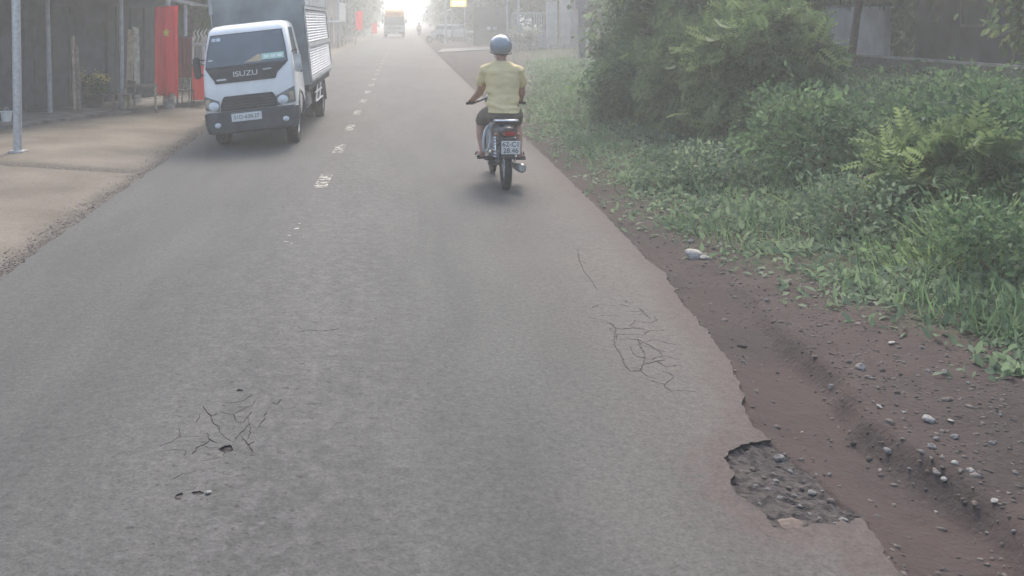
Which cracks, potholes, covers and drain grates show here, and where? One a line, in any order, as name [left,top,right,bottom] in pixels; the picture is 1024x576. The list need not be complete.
crack [592,305,694,392]
pothole [724,441,867,530]
crack [166,395,281,476]
